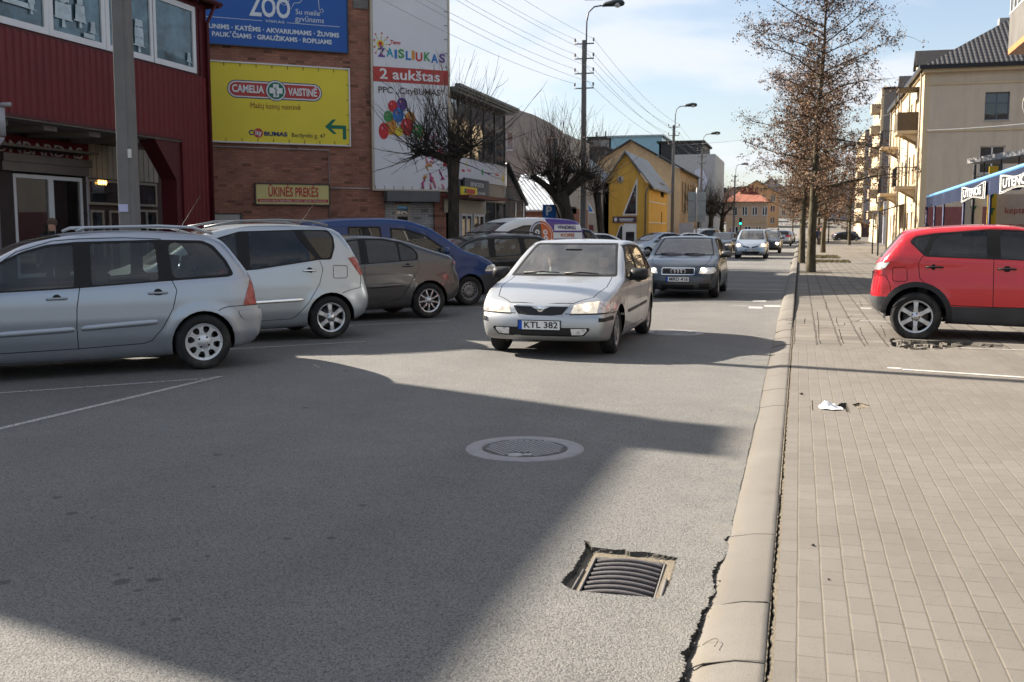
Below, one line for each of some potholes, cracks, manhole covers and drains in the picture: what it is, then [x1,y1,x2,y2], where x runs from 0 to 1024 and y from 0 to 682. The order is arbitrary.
crack [677,374,770,682]
drain grate [560,540,677,599]
manhole cover [466,436,584,462]
